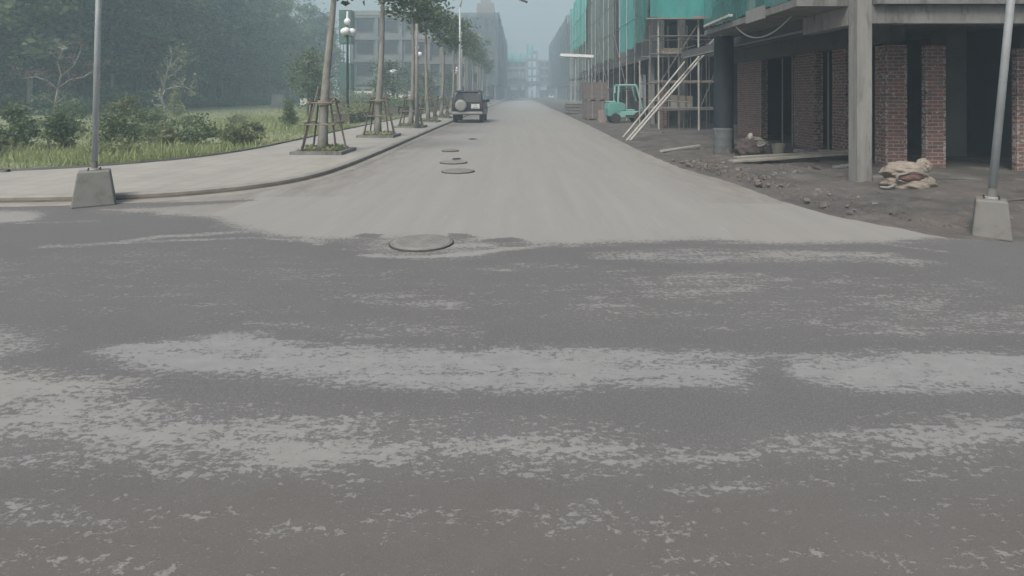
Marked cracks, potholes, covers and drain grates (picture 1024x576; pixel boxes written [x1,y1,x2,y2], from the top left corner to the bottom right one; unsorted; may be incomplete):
manhole cover [389,234,454,252]
